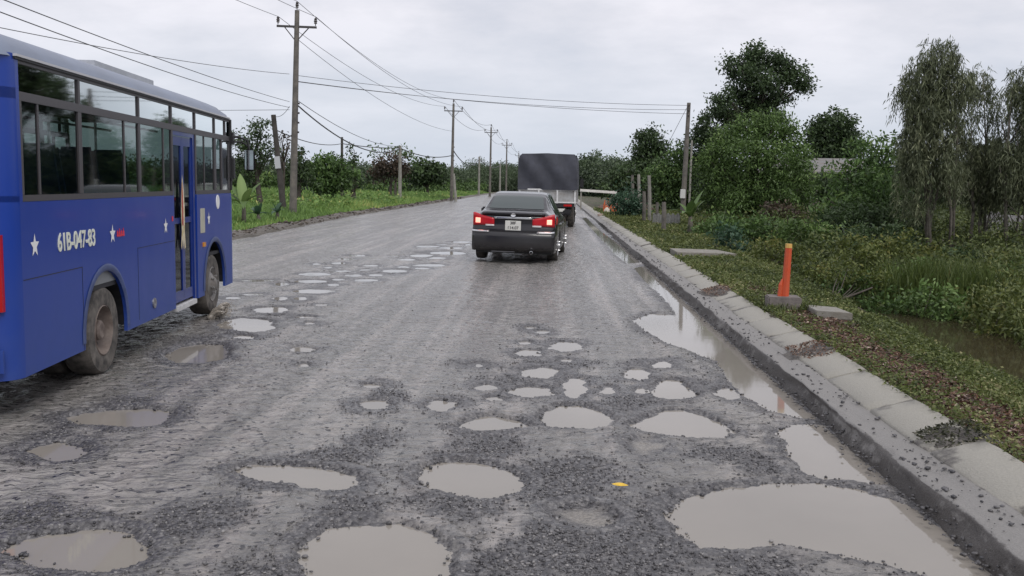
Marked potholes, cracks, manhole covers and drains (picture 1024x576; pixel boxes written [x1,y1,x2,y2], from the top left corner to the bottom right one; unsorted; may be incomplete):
pothole [146,339,247,366]
pothole [397,453,548,504]
pothole [271,510,480,576]
pothole [438,408,540,438]
pothole [524,400,628,434]
pothole [0,433,112,466]
pothole [0,515,181,576]
pothole [636,373,710,403]
pothole [44,401,191,432]
pothole [209,457,387,497]
pothole [505,363,576,381]
pothole [618,404,754,443]
